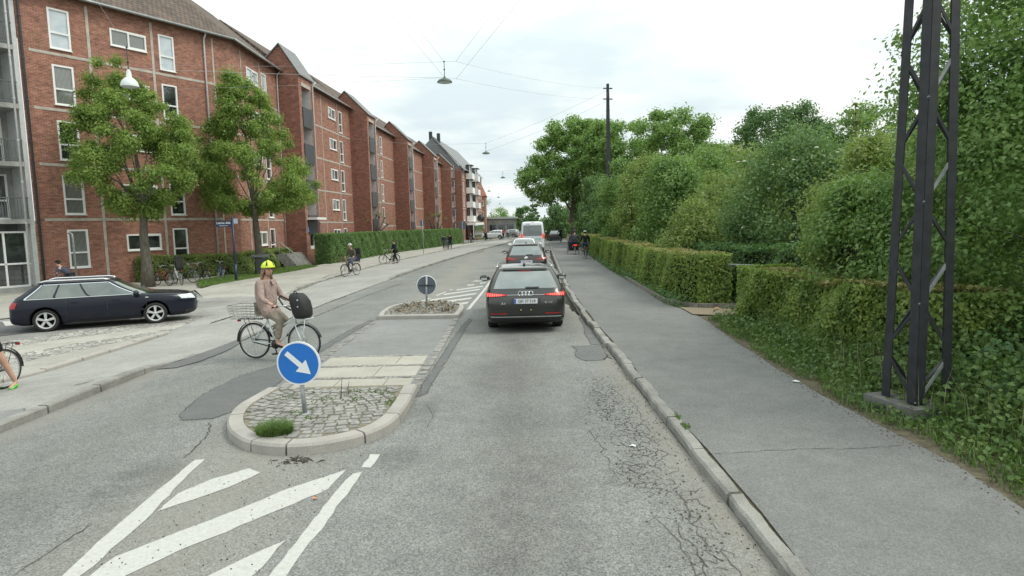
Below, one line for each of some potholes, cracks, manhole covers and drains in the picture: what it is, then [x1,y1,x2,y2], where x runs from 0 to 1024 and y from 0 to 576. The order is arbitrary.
crack [573,374,757,576]
